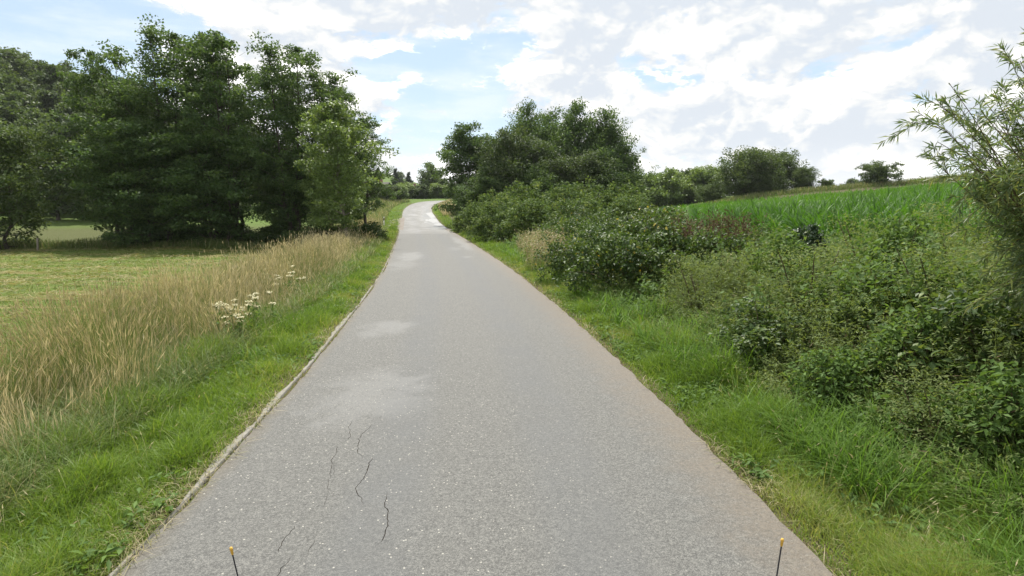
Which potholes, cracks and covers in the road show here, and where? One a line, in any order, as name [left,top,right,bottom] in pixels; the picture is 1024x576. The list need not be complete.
crack [324,422,373,505]
